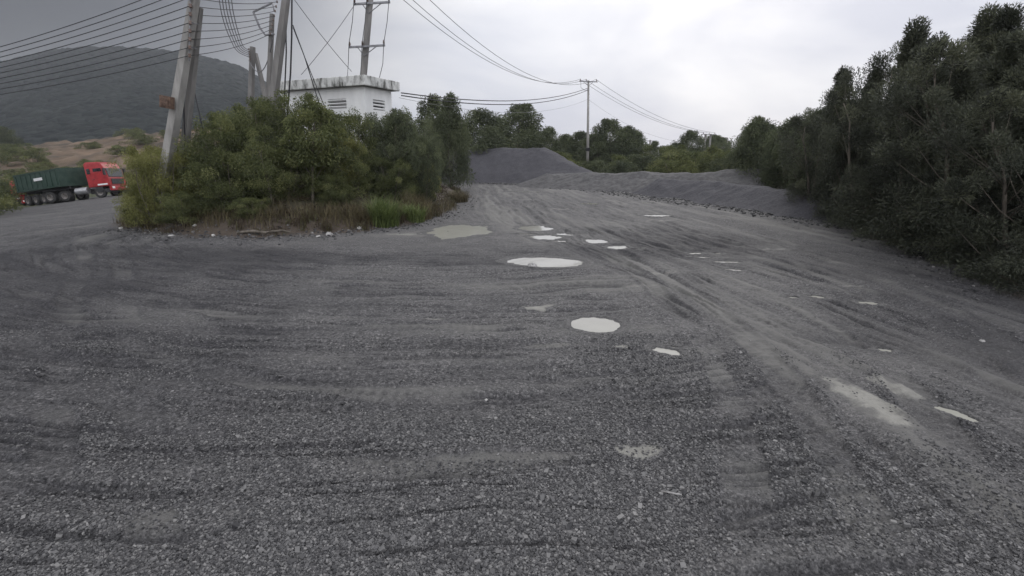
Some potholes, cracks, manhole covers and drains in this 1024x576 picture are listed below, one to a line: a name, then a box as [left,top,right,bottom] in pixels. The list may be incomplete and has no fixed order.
pothole [416,223,502,242]
pothole [643,343,694,359]
pothole [919,399,997,428]
pothole [512,224,561,232]
pothole [495,256,594,269]
pothole [562,315,630,335]
